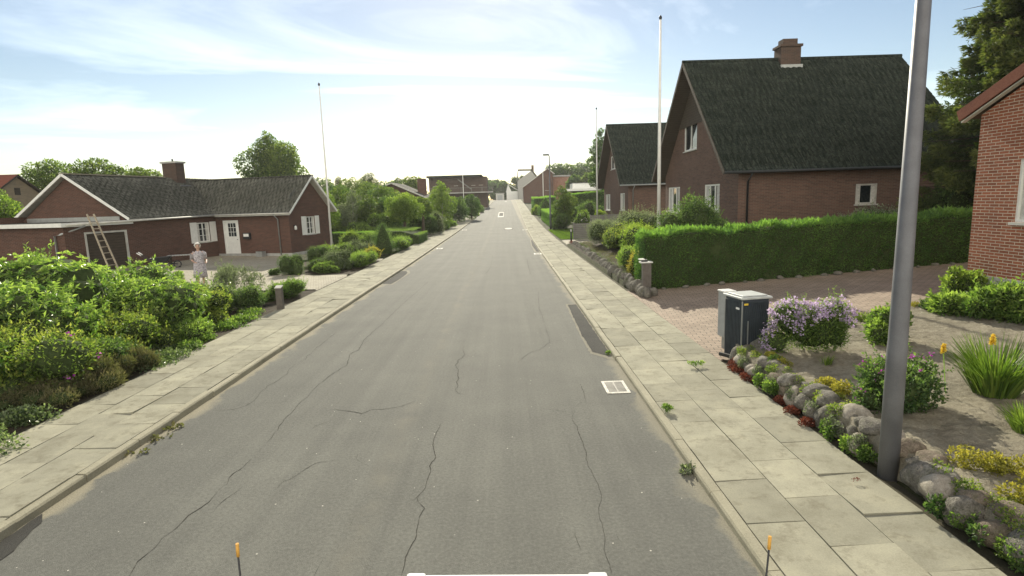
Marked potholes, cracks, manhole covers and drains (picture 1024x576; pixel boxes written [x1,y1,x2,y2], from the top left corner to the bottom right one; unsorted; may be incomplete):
crack [131,282,428,573]
crack [401,424,441,575]
drain grate [601,380,631,394]
crack [557,384,618,569]
